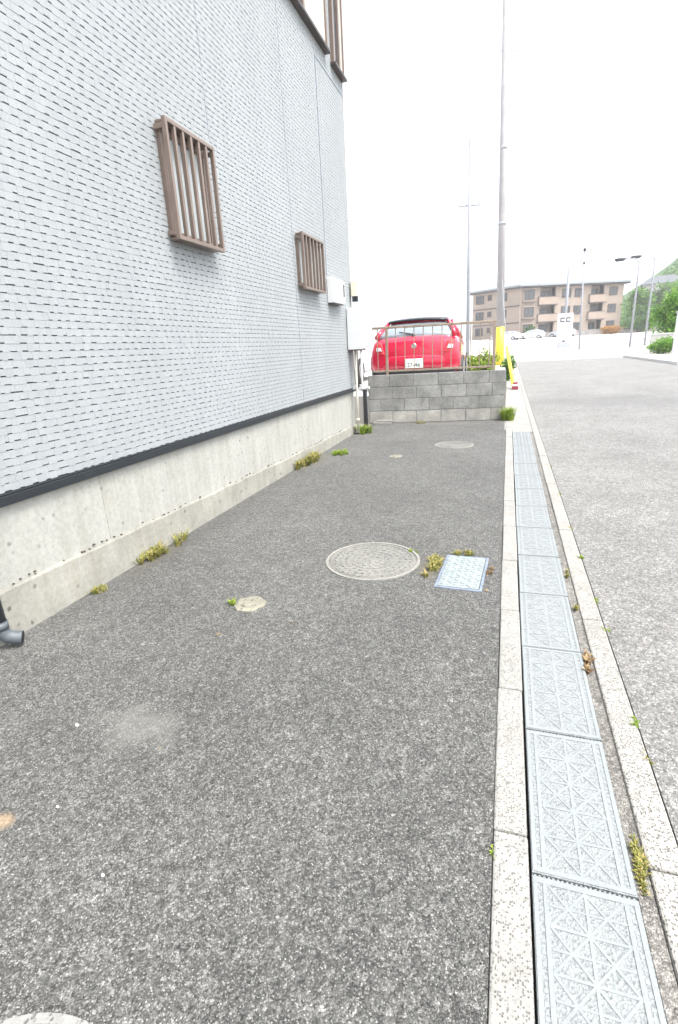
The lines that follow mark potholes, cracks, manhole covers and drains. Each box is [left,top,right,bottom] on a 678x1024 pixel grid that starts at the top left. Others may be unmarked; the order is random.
manhole cover [0,1012,91,1024]
manhole cover [434,441,474,449]
manhole cover [326,542,420,581]
utility cover [234,596,266,612]
